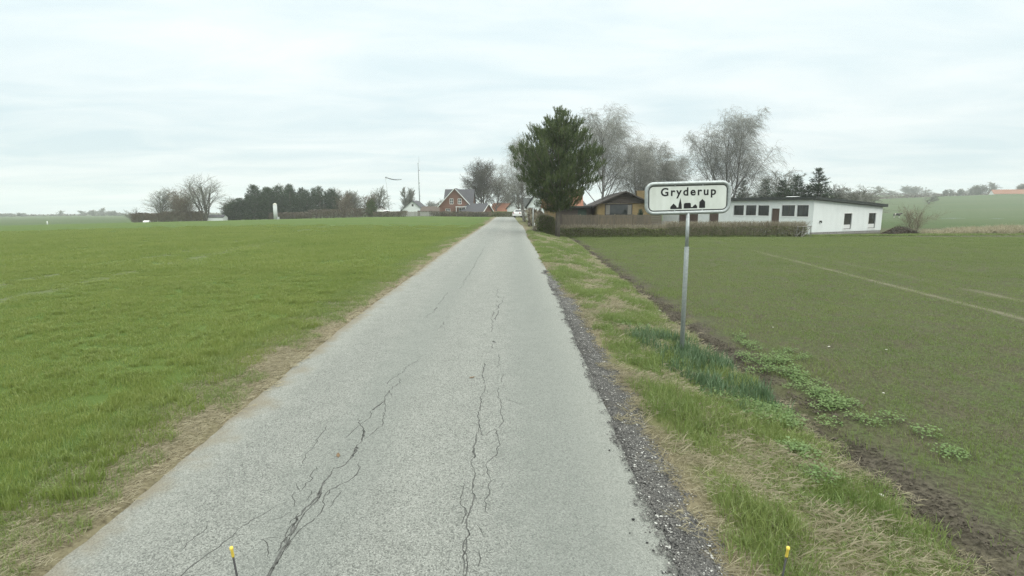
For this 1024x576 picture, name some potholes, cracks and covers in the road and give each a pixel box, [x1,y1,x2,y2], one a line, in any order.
crack [180,359,419,576]
crack [460,290,521,576]
